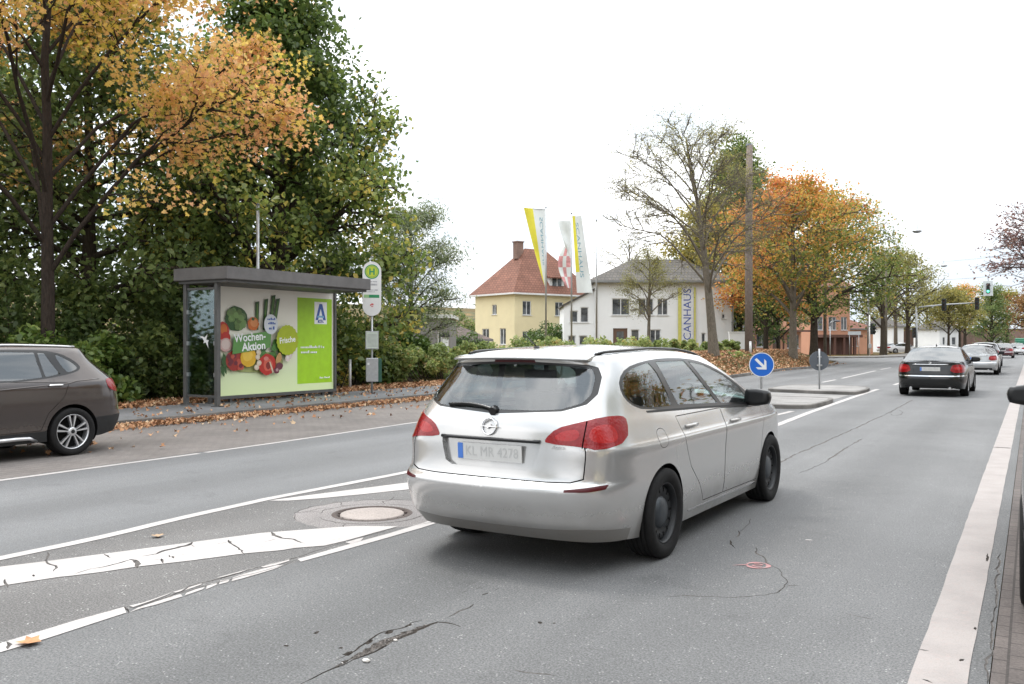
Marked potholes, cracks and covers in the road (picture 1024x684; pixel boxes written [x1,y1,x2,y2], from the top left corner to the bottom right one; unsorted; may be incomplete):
crack [667,519,797,598]
crack [301,588,497,684]
crack [984,555,1001,684]
manhole cover [331,506,413,522]
crack [157,542,193,563]
